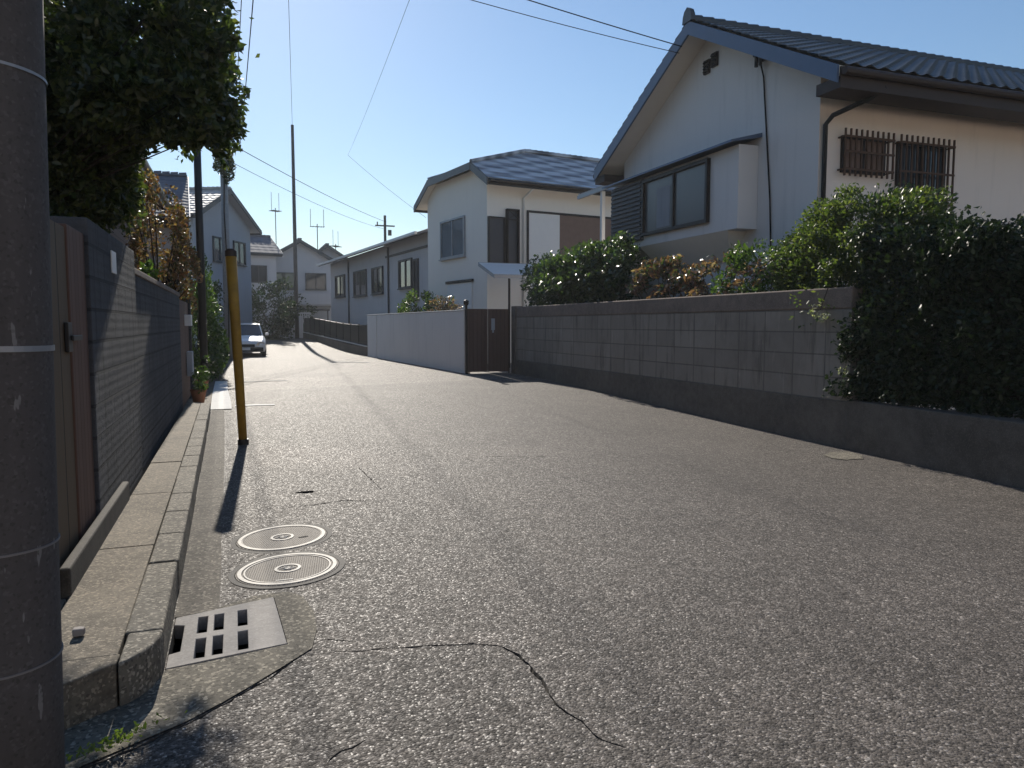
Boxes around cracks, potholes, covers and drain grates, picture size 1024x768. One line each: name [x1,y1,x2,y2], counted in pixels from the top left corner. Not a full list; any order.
crack [289,468,382,508]
drain grate [165,597,287,670]
crack [307,639,630,749]
manhole cover [230,524,332,553]
crack [328,739,366,762]
manhole cover [228,551,345,589]
